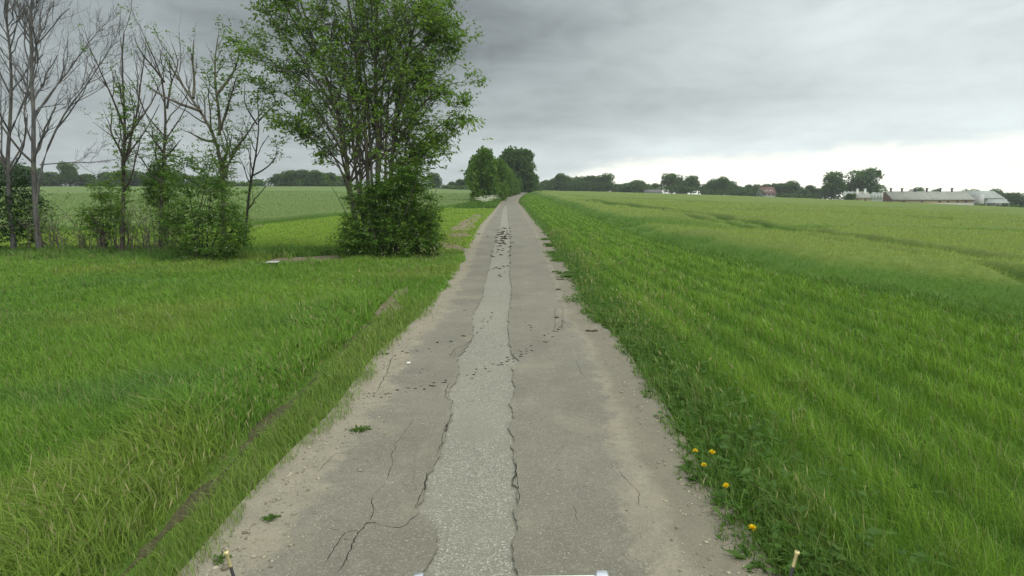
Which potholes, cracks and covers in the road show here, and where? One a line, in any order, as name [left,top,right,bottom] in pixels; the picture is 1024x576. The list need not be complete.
crack [326,421,428,572]
